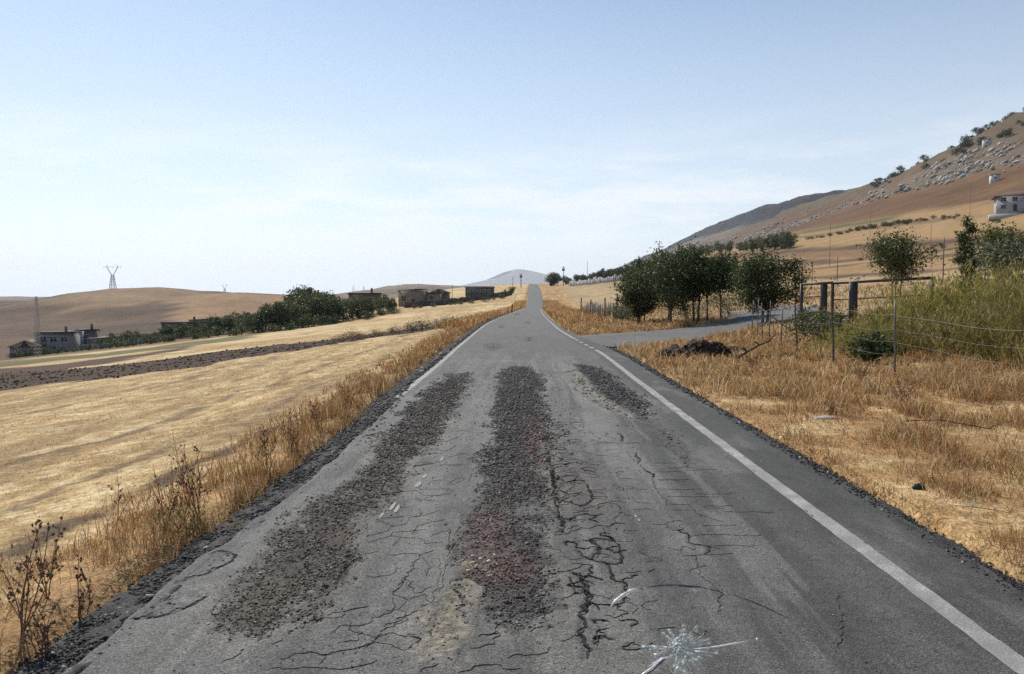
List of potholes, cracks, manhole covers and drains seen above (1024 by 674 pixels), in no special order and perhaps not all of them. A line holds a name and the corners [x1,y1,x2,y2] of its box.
pothole [568,363,671,423]
pothole [445,366,590,635]
pothole [170,372,489,643]
crack [266,430,470,670]
crack [458,422,760,673]
crack [134,550,238,619]
